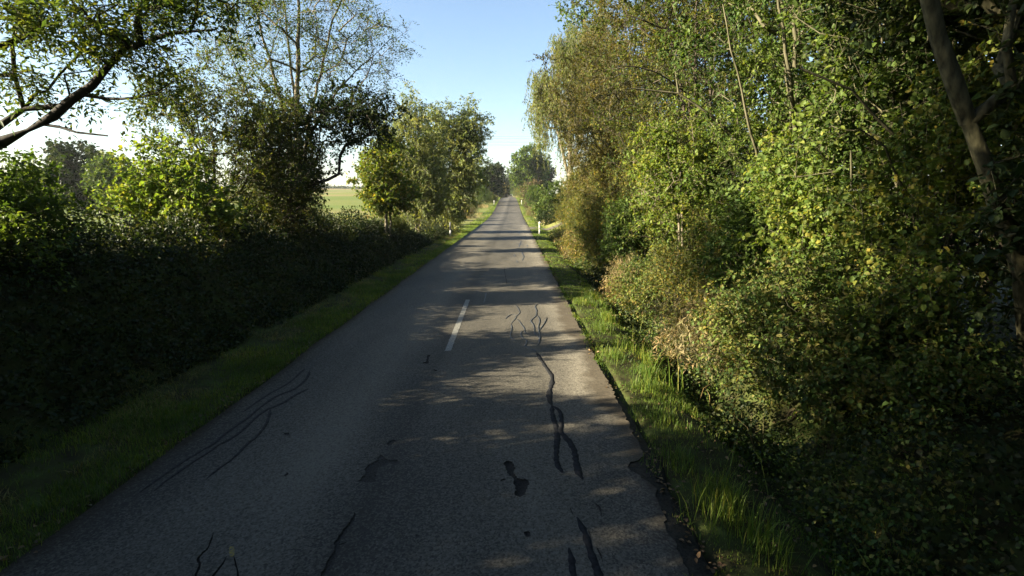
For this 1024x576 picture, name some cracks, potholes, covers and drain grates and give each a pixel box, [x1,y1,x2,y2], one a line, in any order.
pothole [503,461,529,497]
crack [321,513,356,576]
pothole [359,455,399,483]
crack [194,532,239,576]
